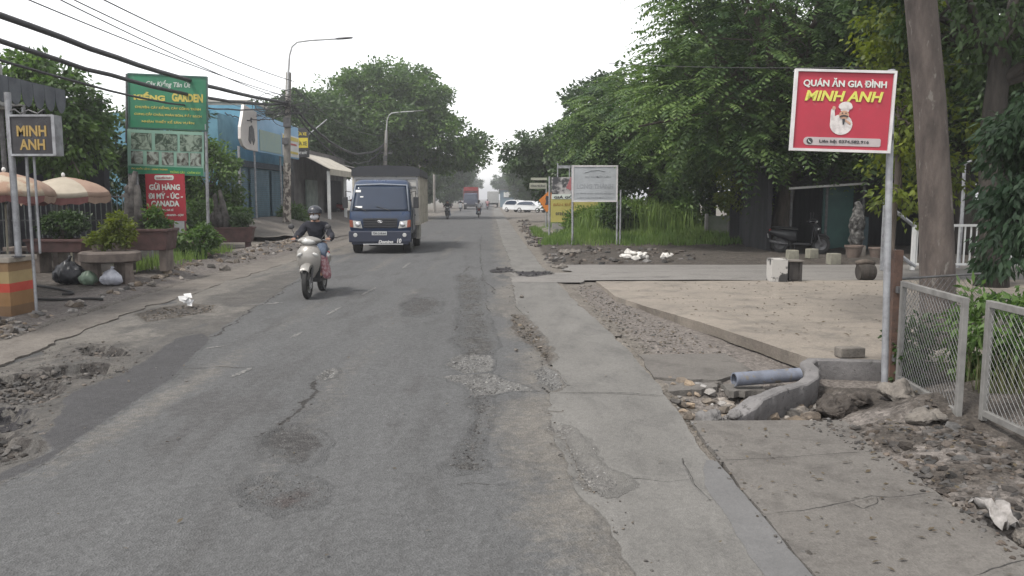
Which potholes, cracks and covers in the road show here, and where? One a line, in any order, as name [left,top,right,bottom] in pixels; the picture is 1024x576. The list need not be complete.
pothole [36,362,131,386]
pothole [75,346,131,358]
crack [625,458,713,500]
pothole [0,432,50,464]
pothole [547,423,640,498]
pothole [507,314,559,365]
crack [762,492,935,516]
crack [148,276,326,437]
pothole [528,365,567,392]
pothole [436,372,538,396]
pothole [0,407,39,433]
